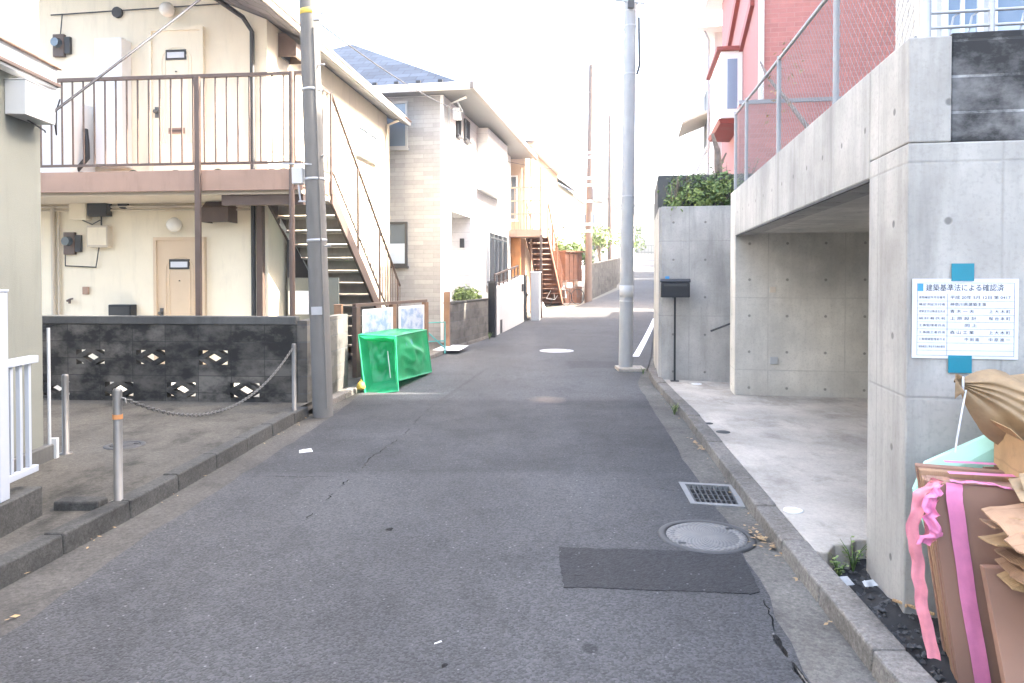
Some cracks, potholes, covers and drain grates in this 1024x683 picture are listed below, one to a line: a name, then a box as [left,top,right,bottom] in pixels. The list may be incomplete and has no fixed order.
drain grate [679,482,746,508]
crack [259,405,433,518]
manhole cover [103,440,146,450]
manhole cover [658,520,757,554]
